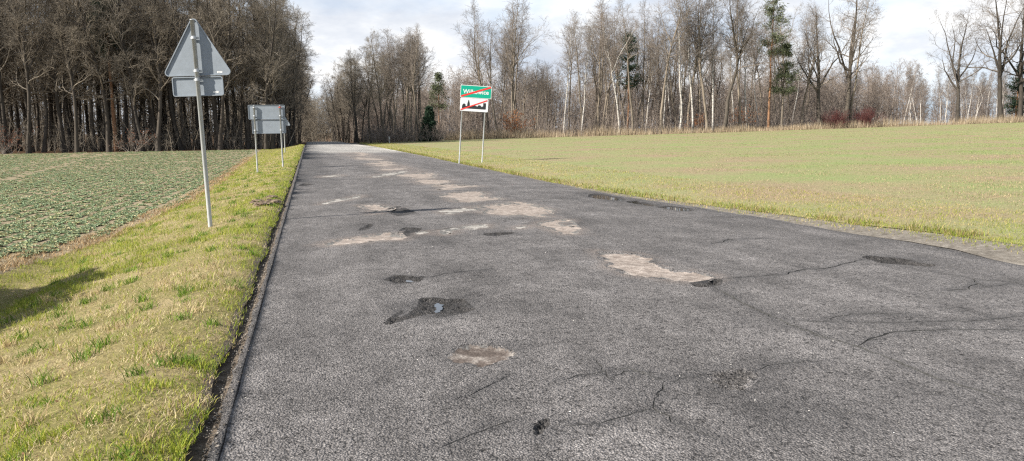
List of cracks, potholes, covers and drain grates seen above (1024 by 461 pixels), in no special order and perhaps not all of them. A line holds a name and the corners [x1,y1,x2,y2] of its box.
crack [438,419,517,449]
pothole [588,193,625,201]
pothole [690,279,723,287]
pothole [383,275,428,284]
crack [713,259,1024,405]
pothole [383,297,475,325]
pothole [533,418,550,435]
pothole [862,255,936,267]
crack [555,358,822,440]
